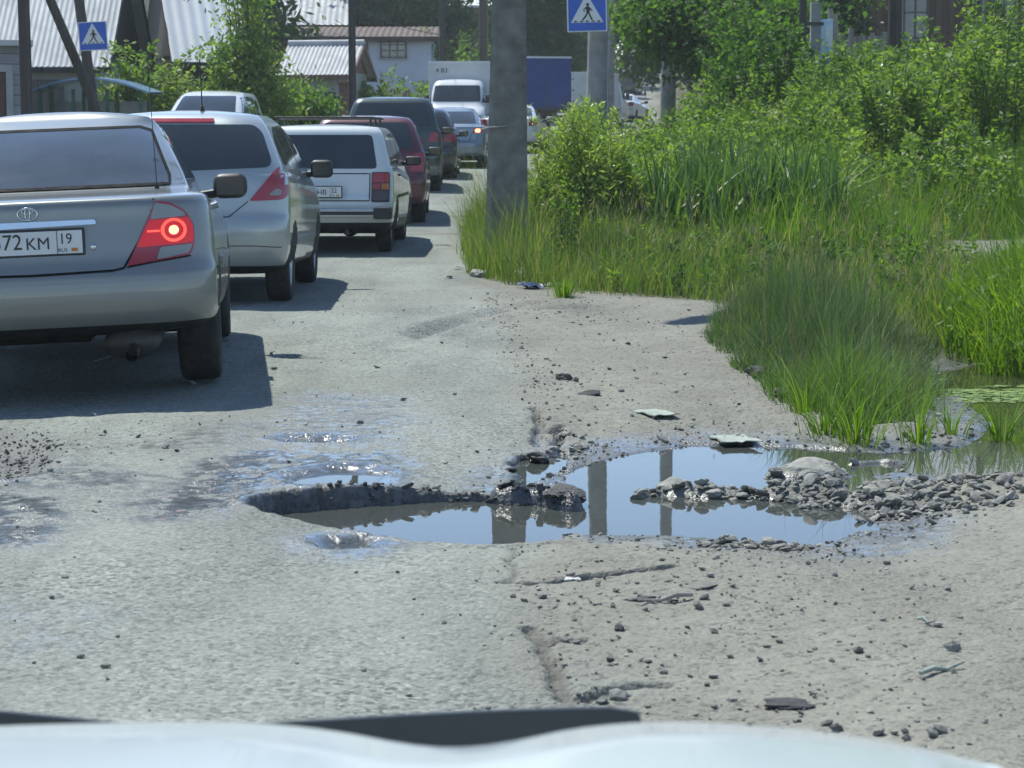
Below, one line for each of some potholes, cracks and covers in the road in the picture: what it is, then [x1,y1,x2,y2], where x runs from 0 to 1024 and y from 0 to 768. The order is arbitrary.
pothole [264,431,367,442]
pothole [240,483,584,541]
crack [490,543,695,587]
pothole [302,531,402,549]
pothole [504,448,579,488]
crack [522,405,575,449]
pothole [268,461,401,485]
crack [509,623,691,707]
